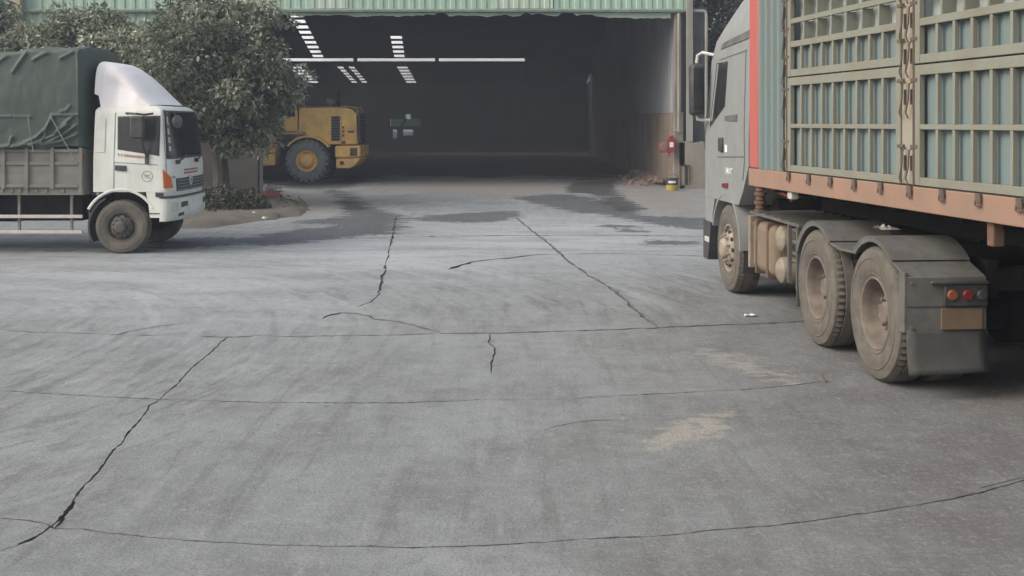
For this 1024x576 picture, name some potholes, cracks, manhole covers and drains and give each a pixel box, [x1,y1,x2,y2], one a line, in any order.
crack [0,218,1024,551]
